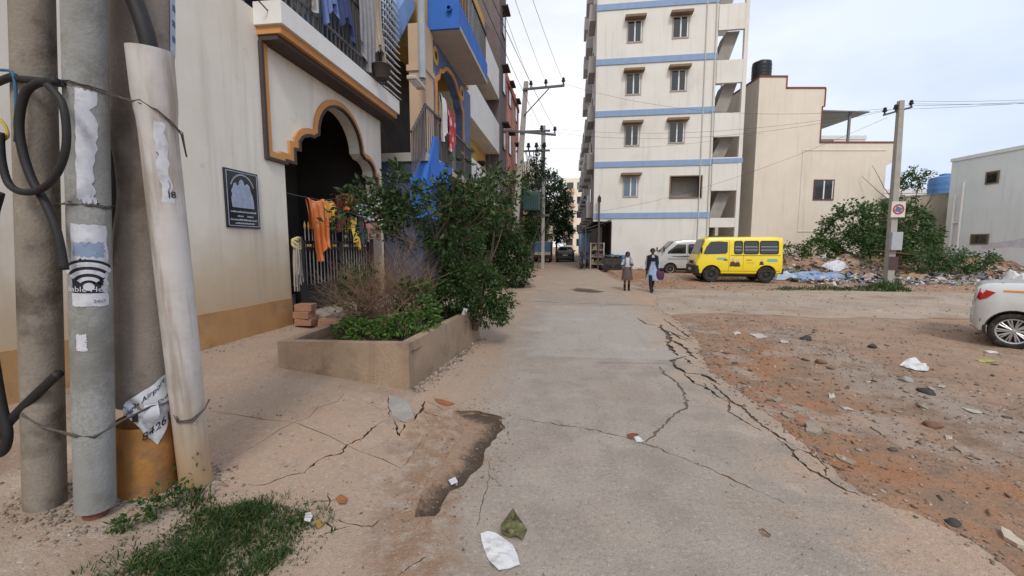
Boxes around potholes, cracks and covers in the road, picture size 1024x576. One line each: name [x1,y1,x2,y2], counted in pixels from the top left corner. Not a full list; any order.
pothole [415,411,505,517]
crack [262,400,441,485]
crack [308,496,372,535]
crack [521,319,858,501]
